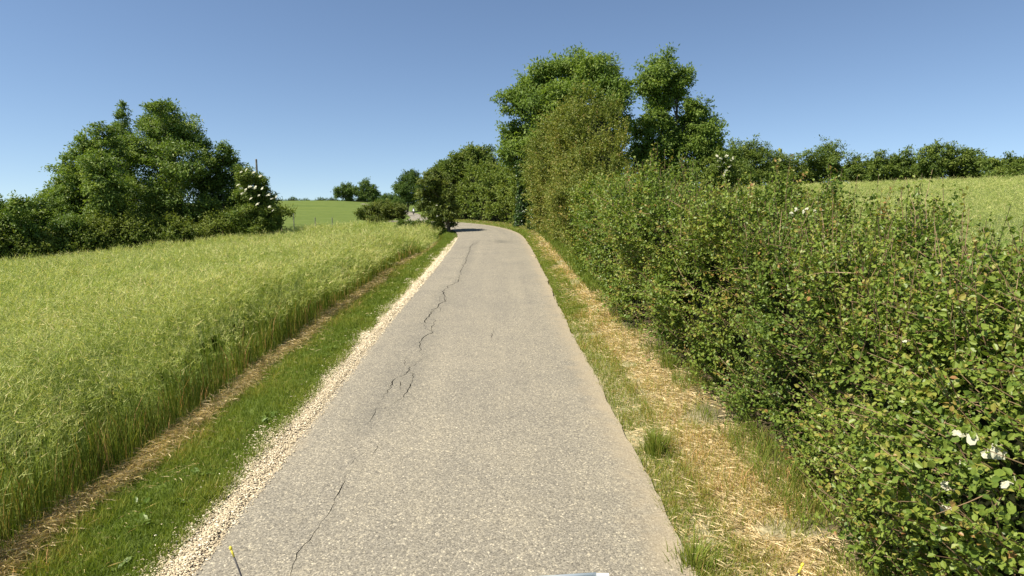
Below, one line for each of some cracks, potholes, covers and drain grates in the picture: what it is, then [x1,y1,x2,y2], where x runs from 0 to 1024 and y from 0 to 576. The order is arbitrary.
crack [290,442,380,575]
crack [371,243,477,419]
